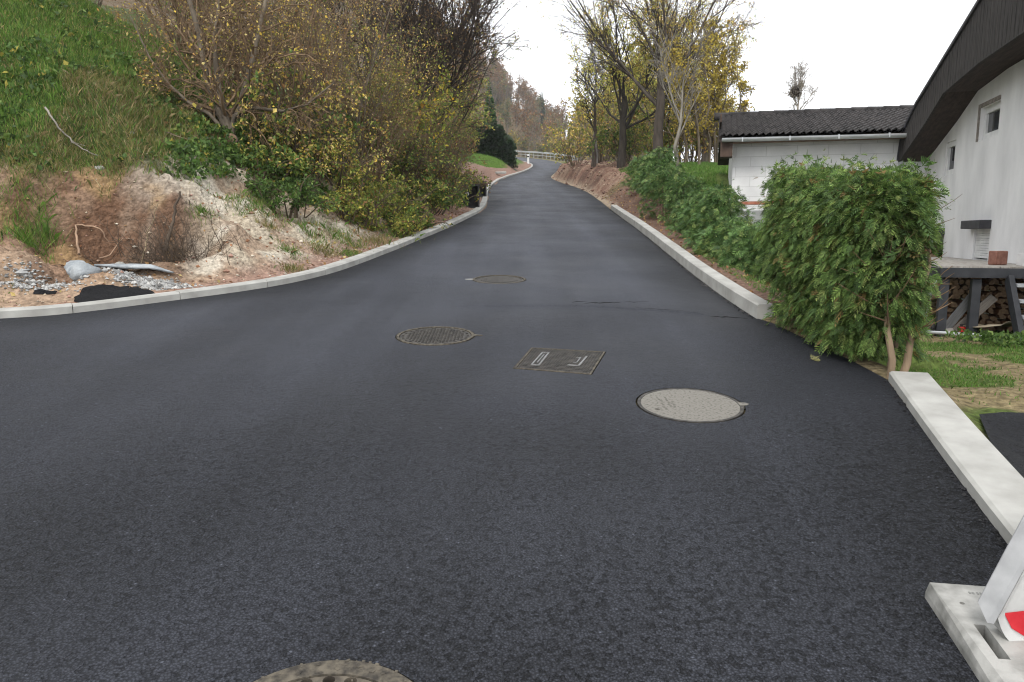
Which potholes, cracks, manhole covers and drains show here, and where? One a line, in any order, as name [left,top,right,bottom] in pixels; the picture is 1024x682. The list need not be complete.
manhole cover [514,347,605,375]
manhole cover [254,659,412,682]
manhole cover [637,388,749,423]
manhole cover [396,326,483,346]
manhole cover [465,275,526,284]
